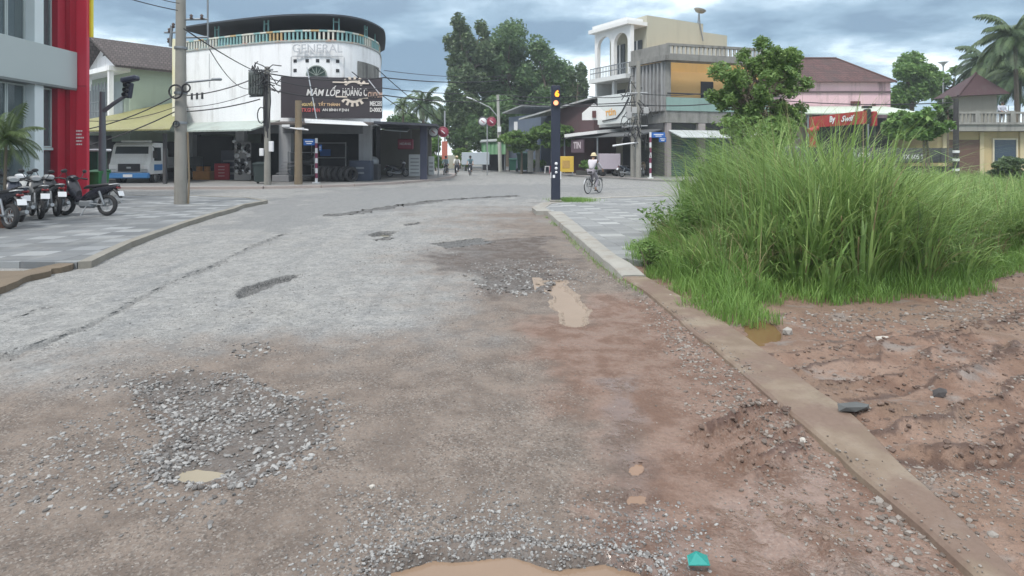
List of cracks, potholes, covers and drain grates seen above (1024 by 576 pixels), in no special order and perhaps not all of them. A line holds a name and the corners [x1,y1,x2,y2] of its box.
pothole [232,274,302,300]
pothole [360,530,670,576]
pothole [430,238,497,249]
crack [0,233,288,363]
pothole [615,458,654,480]
pothole [532,278,593,328]
pothole [123,369,330,491]
pothole [462,268,556,296]
pothole [613,488,657,509]
